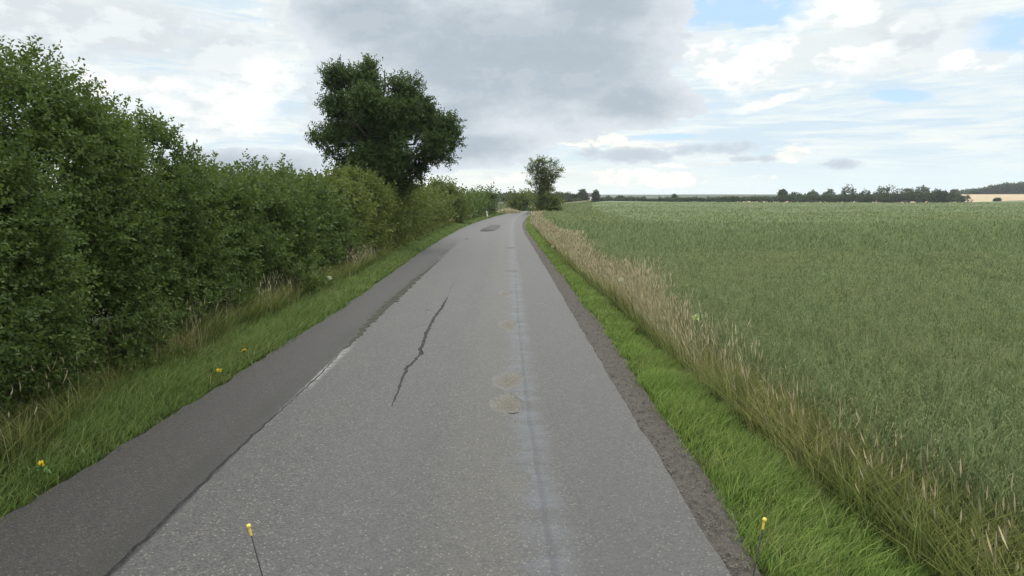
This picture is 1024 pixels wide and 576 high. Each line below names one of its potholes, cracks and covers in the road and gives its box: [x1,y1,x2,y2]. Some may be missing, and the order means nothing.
crack [343,260,455,407]
